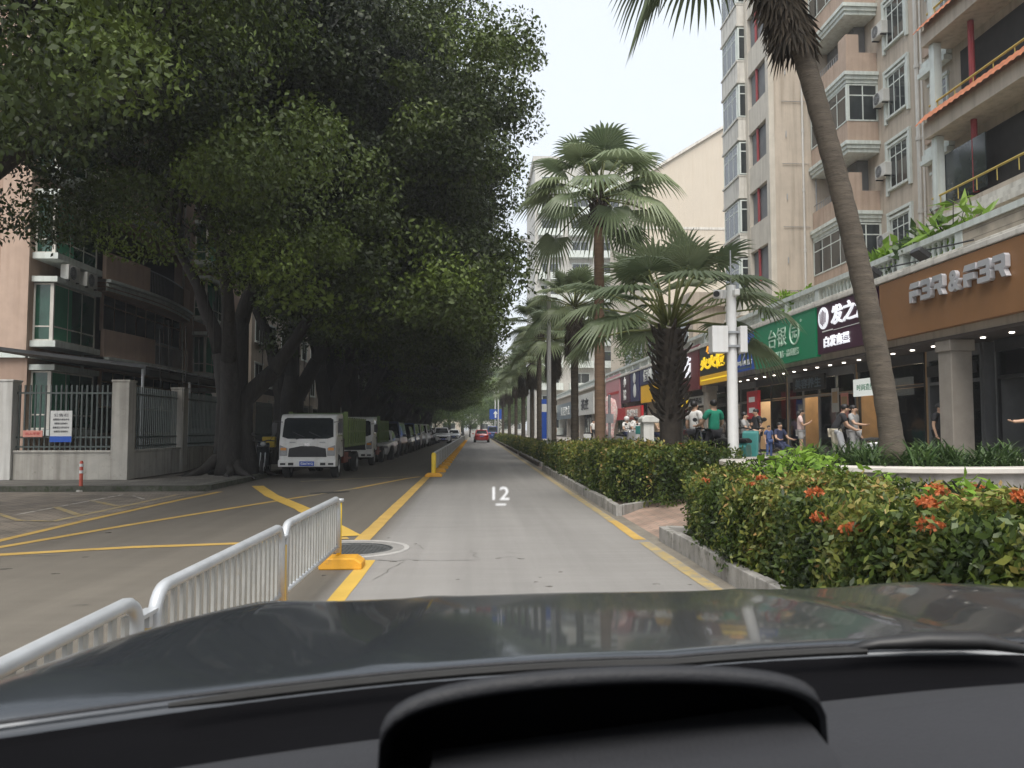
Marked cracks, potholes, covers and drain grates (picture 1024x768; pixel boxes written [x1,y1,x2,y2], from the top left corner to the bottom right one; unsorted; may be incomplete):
manhole cover [333,540,410,558]
